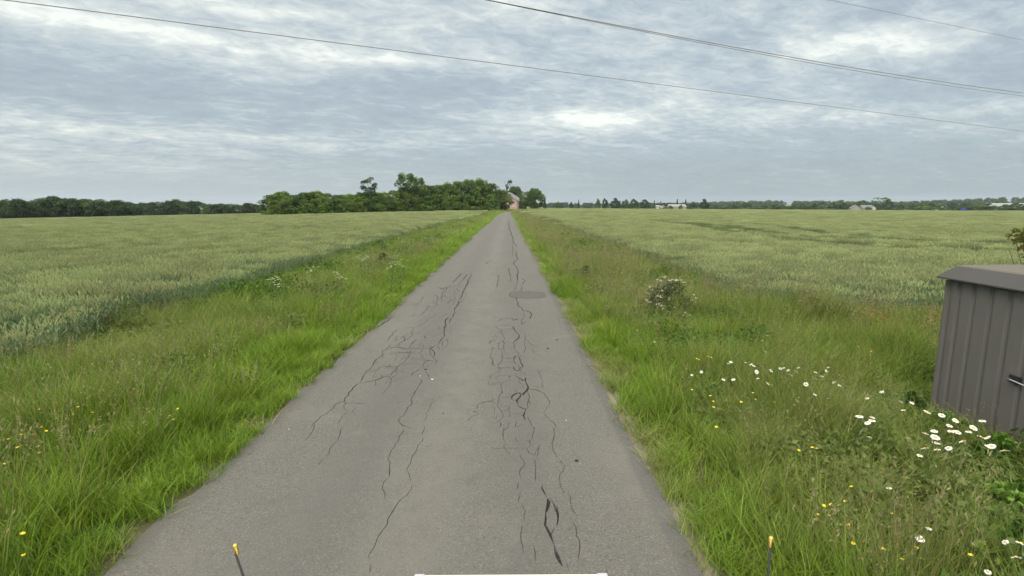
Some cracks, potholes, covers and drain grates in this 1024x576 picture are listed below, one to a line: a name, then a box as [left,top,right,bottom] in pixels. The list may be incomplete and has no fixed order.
crack [307,222,580,570]
